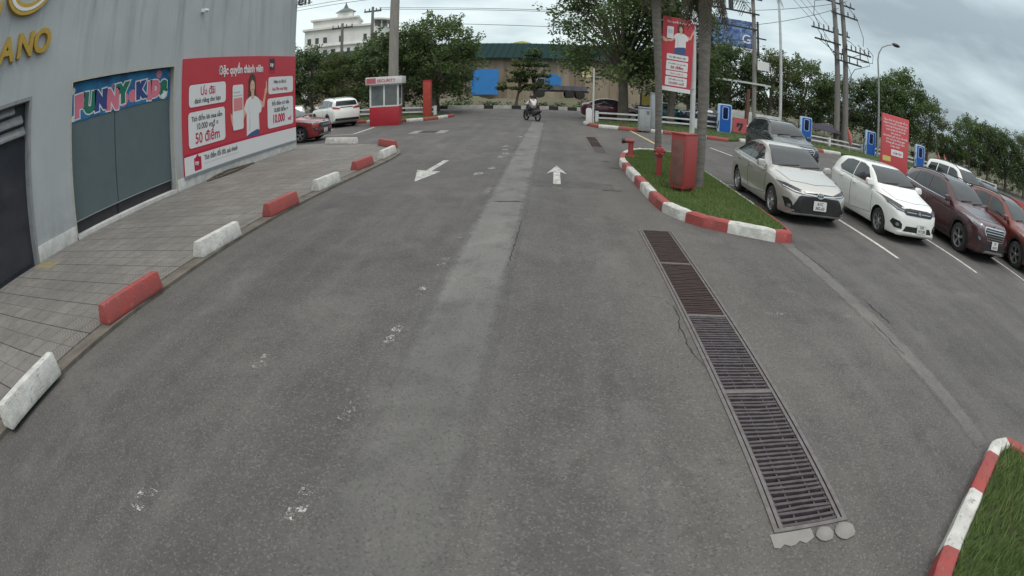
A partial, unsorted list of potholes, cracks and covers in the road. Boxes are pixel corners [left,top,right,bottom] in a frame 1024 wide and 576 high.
drain grate [643,230,689,263]
drain grate [662,264,723,315]
drain grate [727,394,836,528]
drain grate [689,317,769,390]
